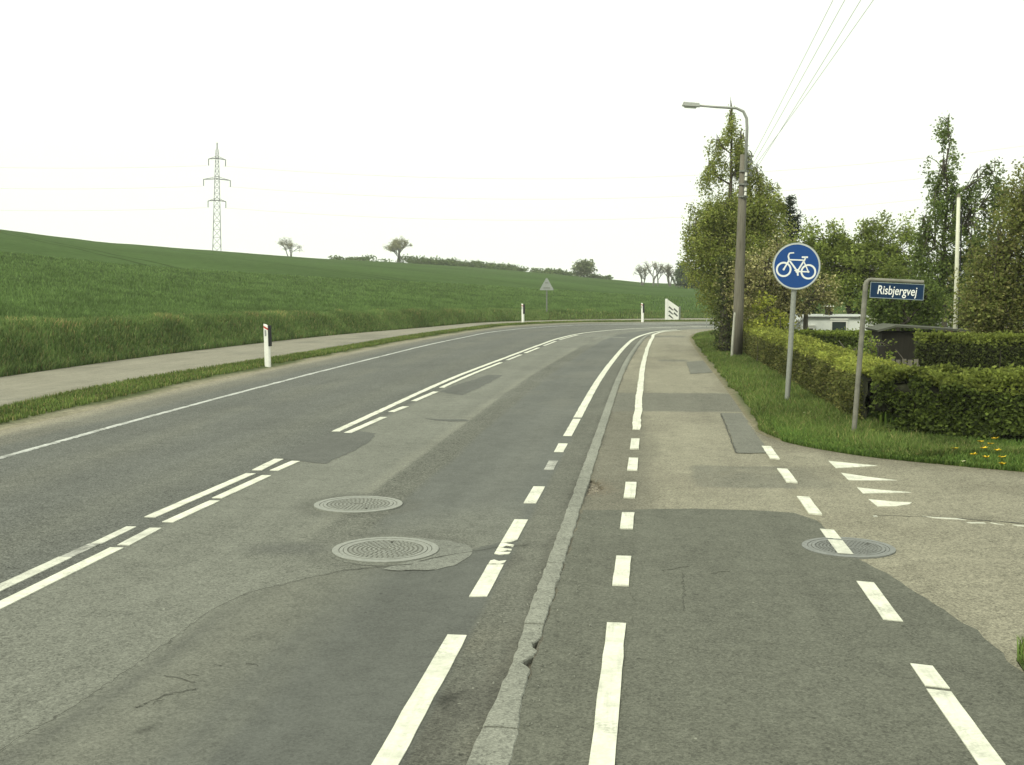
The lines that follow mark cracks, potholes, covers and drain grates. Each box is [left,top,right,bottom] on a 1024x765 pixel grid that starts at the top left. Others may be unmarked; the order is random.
crack [1,544,527,750]
pothole [586,482,602,495]
manhole cover [332,537,439,563]
manhole cover [314,496,403,513]
manhole cover [802,537,896,559]
